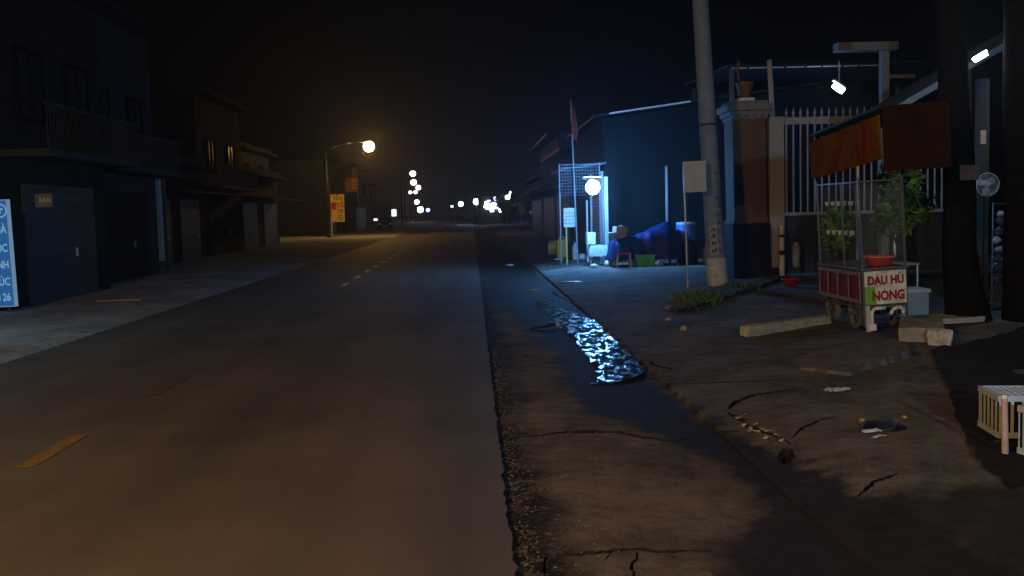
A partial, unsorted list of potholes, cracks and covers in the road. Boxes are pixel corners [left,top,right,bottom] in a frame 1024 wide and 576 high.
crack [857,473,898,497]
crack [515,430,689,441]
crack [710,388,838,444]
crack [542,547,713,576]
